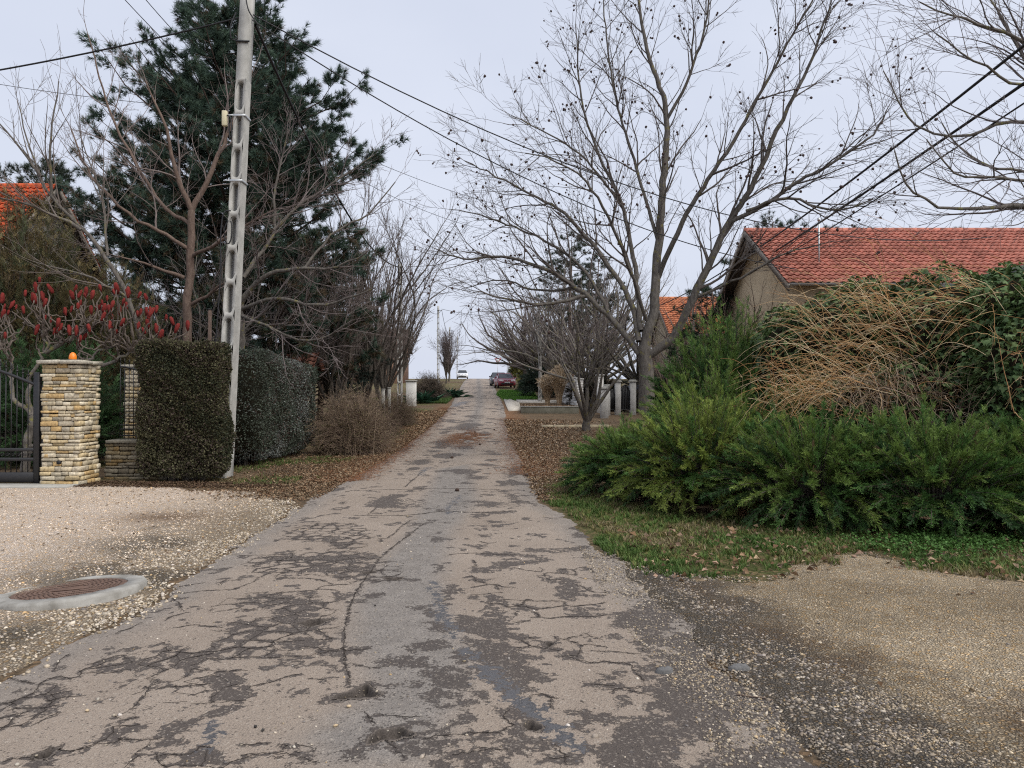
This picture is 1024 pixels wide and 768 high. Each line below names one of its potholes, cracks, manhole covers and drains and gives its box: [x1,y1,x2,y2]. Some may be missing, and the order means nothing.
pothole [365,727,417,745]
pothole [329,681,384,700]
crack [449,541,649,695]
crack [0,508,504,768]
manhole cover [0,574,147,611]
crack [427,710,569,764]
pothole [519,719,545,732]
